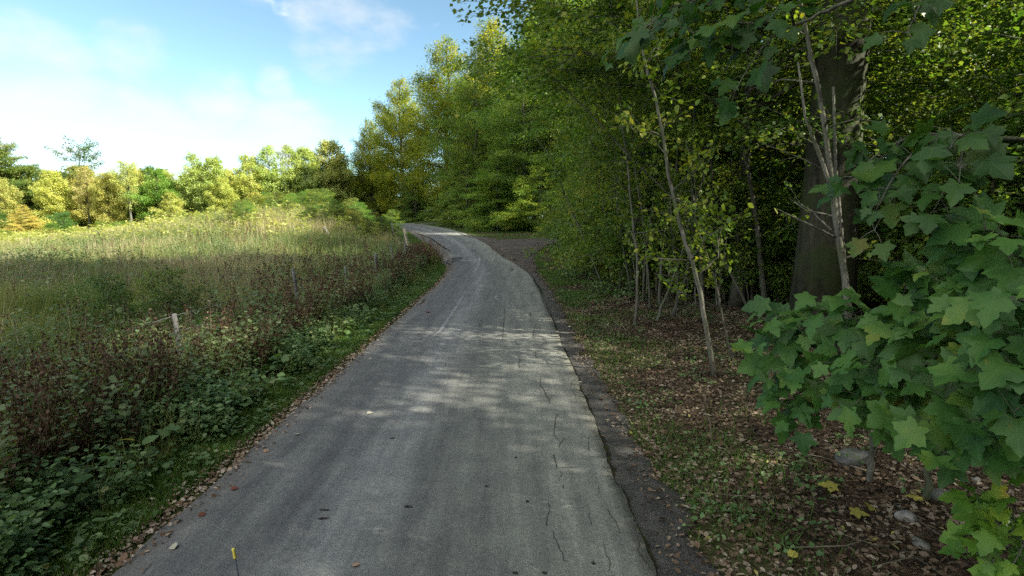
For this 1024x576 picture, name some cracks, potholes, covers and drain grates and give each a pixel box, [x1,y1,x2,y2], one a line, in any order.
crack [502,309,558,367]
crack [539,376,567,562]
